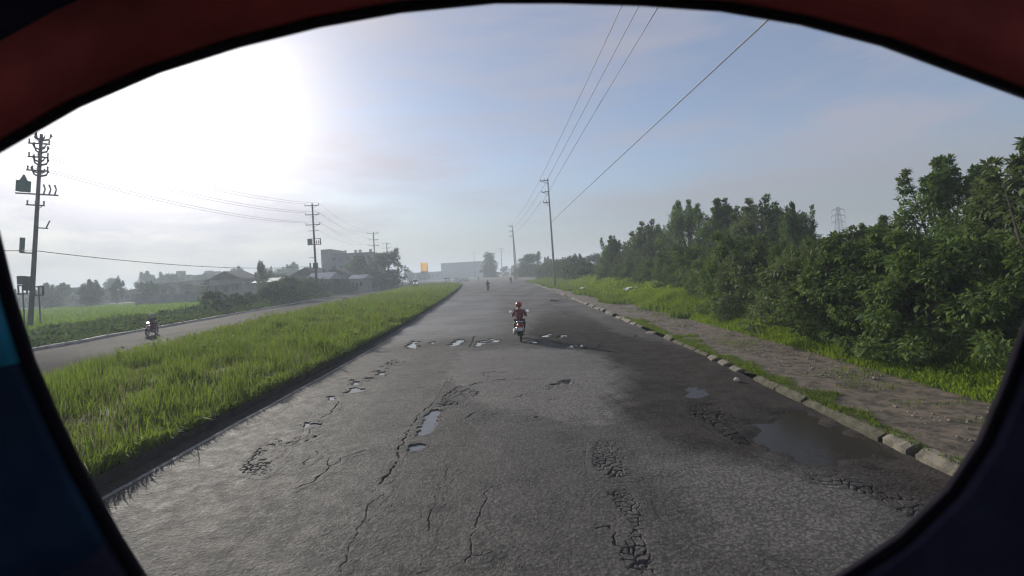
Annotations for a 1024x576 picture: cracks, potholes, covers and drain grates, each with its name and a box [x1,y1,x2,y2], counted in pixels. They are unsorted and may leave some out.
crack [676,401,769,452]
pothole [406,406,450,438]
crack [790,469,930,526]
pothole [340,386,372,395]
crack [225,371,573,576]
pothole [401,340,424,349]
crack [585,437,668,576]
pothole [544,379,578,388]
pothole [403,440,432,454]
